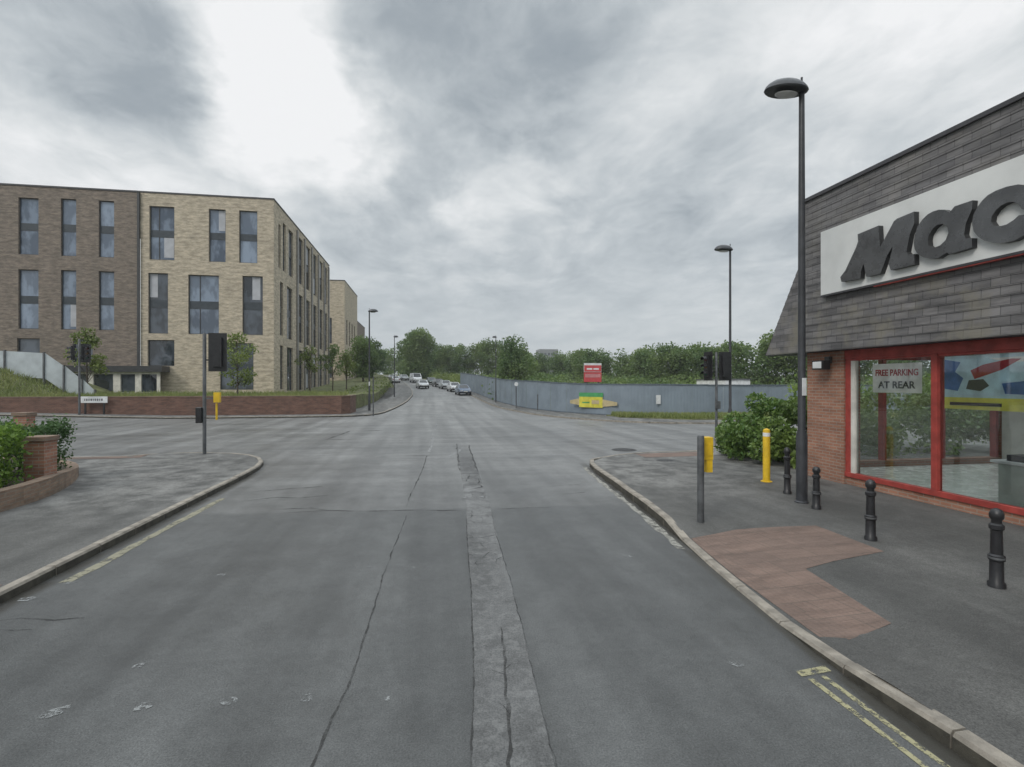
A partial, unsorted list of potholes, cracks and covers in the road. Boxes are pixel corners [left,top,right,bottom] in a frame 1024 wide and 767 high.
crack [256,444,551,767]
